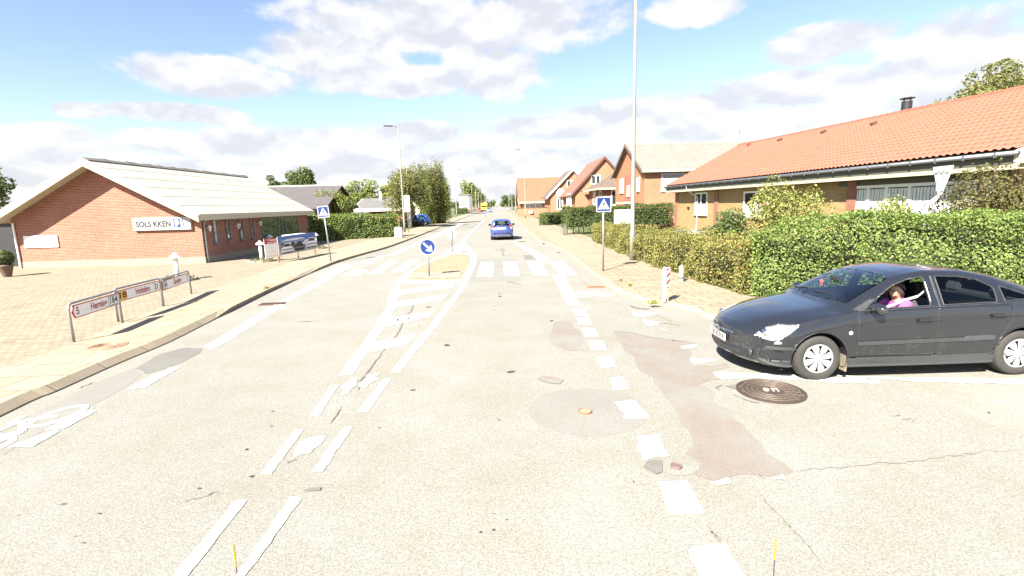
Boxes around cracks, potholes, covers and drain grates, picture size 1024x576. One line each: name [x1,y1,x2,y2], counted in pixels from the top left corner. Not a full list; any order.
crack [758,490,824,571]
crack [356,304,414,390]
manhole cover [86,341,129,351]
manhole cover [736,379,808,404]
